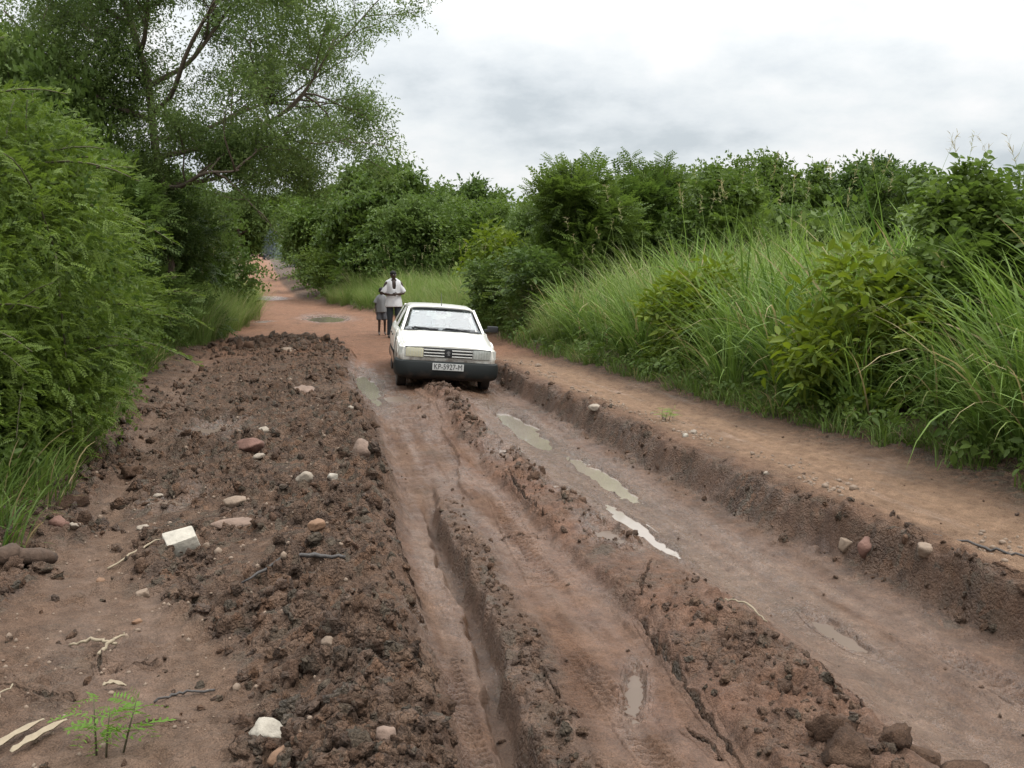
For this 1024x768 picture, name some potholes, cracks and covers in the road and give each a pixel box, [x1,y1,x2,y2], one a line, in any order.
pothole [618,653,650,735]
pothole [585,488,707,576]
pothole [350,367,388,411]
pothole [480,399,573,463]
pothole [557,447,663,518]
pothole [301,314,355,323]
